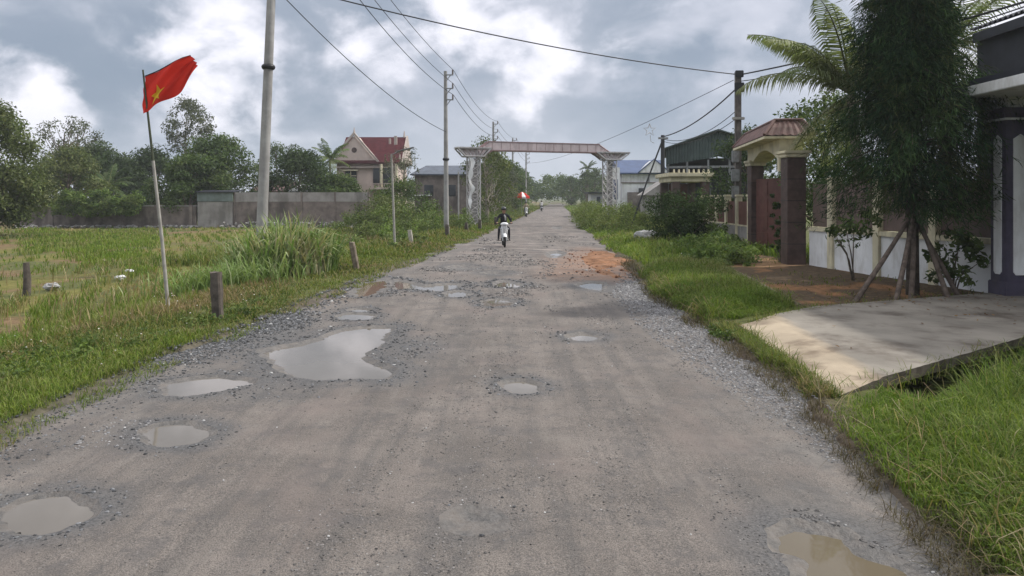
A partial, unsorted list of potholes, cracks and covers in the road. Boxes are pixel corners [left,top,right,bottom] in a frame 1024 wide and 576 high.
pothole [137,420,218,447]
pothole [764,517,927,576]
pothole [388,279,464,291]
pothole [497,378,546,394]
pothole [157,374,258,397]
pothole [563,331,605,341]
pothole [574,281,608,291]
pothole [0,491,103,535]
pothole [347,277,396,297]
pothole [334,312,378,320]
pothole [255,325,399,381]
